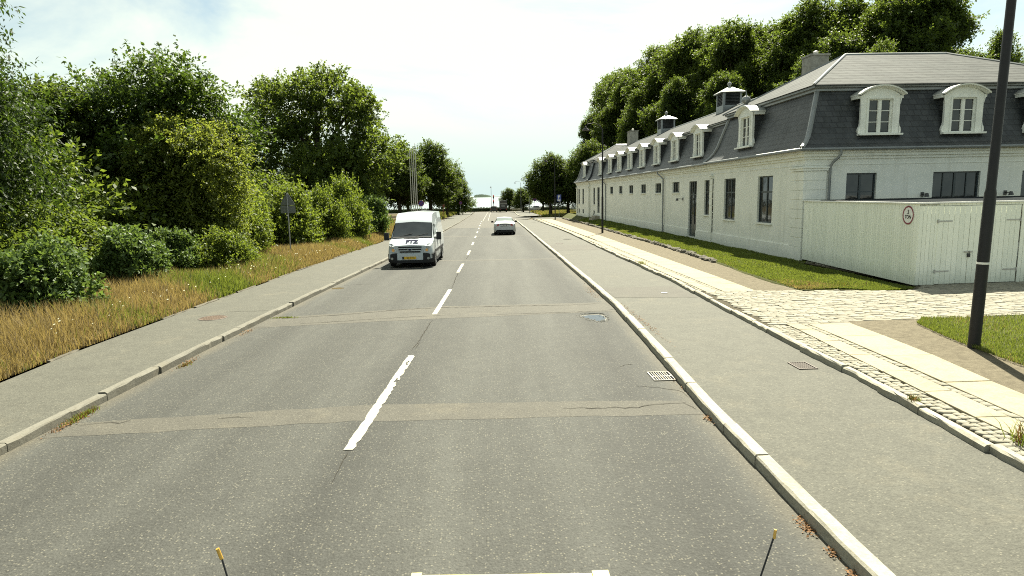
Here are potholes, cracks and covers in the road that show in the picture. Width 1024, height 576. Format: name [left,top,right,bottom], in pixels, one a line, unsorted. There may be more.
pothole [579,313,609,323]
drain grate [787,362,818,370]
drain grate [647,371,677,381]
